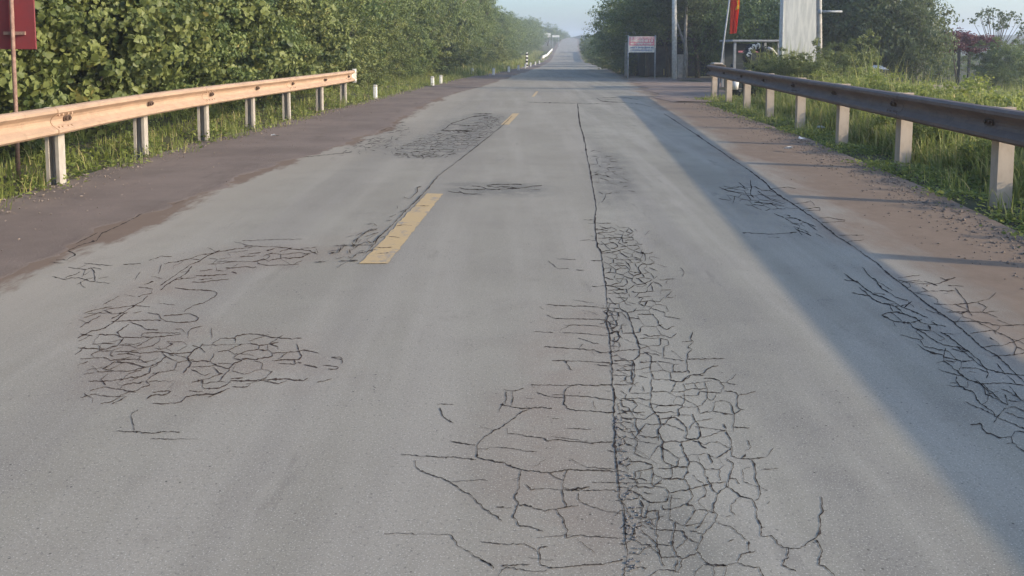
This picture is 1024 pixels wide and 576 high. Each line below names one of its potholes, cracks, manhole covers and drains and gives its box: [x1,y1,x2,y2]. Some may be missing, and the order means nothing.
crack [52,201,182,287]
crack [118,410,183,439]
crack [450,184,542,194]
crack [75,239,343,404]
crack [304,113,511,265]
crack [665,114,1024,451]
